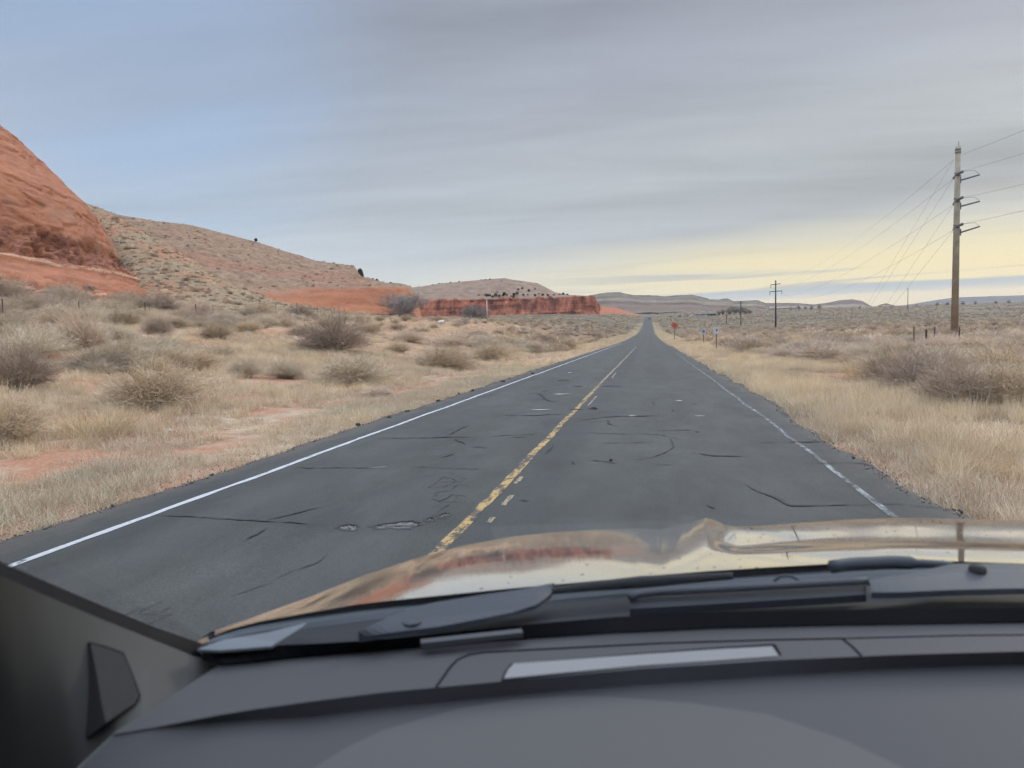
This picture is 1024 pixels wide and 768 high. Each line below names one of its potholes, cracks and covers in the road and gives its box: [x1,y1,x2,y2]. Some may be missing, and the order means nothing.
crack [303,426,554,511]
crack [510,372,699,465]
pothole [334,523,360,531]
crack [746,484,940,508]
crack [147,506,322,539]
pothole [366,519,425,530]
